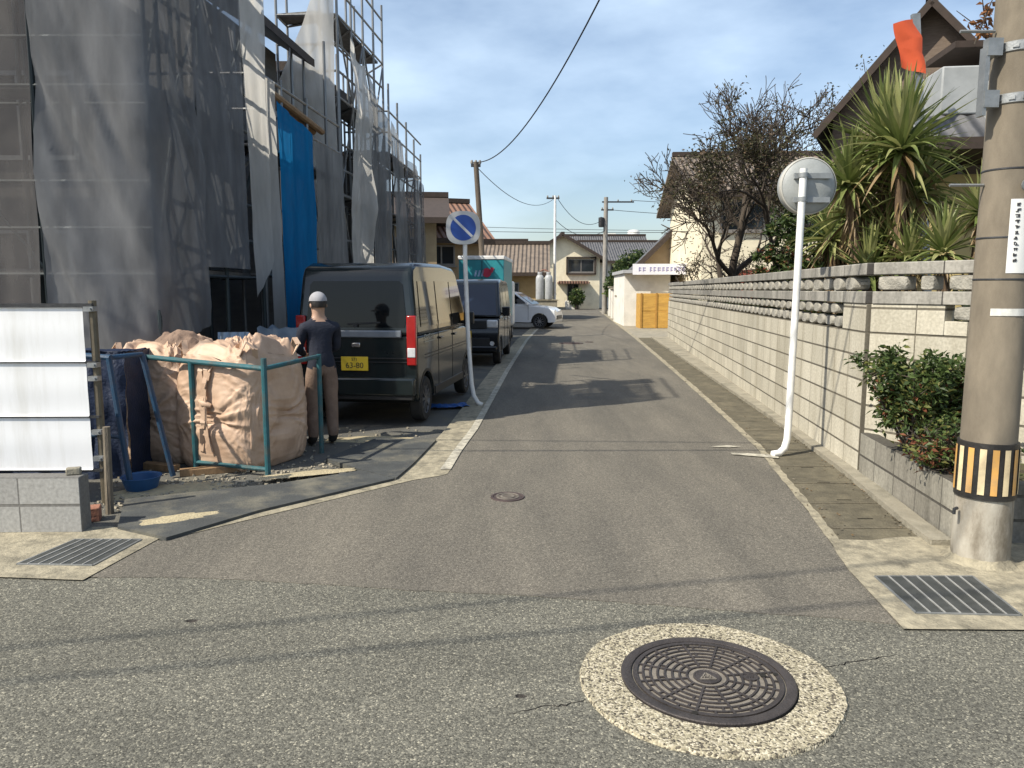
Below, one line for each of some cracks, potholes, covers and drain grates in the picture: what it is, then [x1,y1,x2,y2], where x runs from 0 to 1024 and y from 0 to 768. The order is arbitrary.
manhole cover [491,492,524,502]
drain grate [16,538,142,578]
manhole cover [580,623,849,761]
crack [824,654,897,668]
drain grate [874,575,1023,616]
crack [511,699,586,714]
